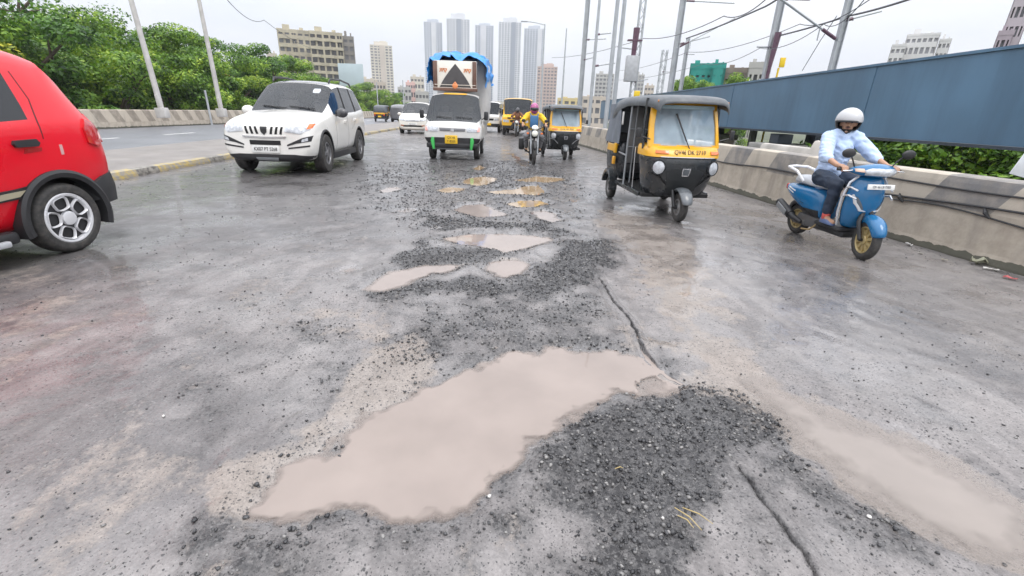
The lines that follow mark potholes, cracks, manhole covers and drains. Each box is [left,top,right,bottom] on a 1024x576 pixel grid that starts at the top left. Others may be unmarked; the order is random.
pothole [425,184,474,193]
pothole [508,174,573,184]
pothole [329,254,475,303]
pothole [468,250,555,287]
pothole [438,200,522,220]
pothole [451,174,506,188]
pothole [495,197,560,209]
pothole [518,206,576,224]
pothole [475,182,553,197]
crack [592,277,689,391]
pothole [415,226,575,254]
